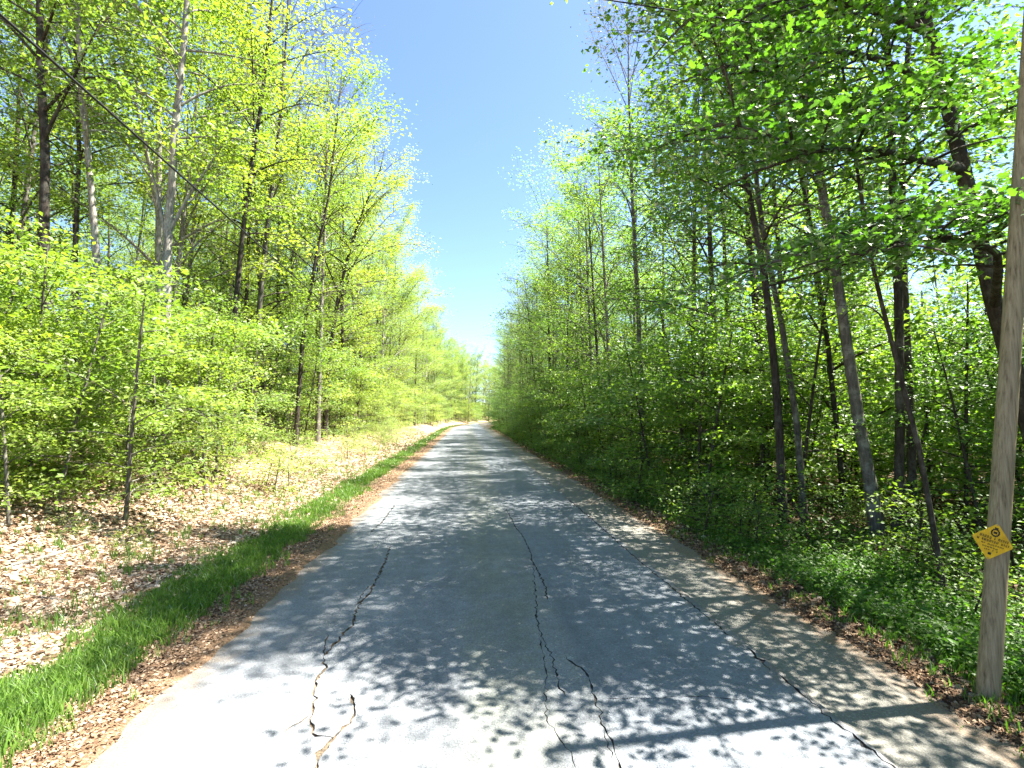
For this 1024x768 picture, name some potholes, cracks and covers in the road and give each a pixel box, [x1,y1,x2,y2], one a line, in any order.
crack [284,505,395,768]
crack [506,509,746,768]
